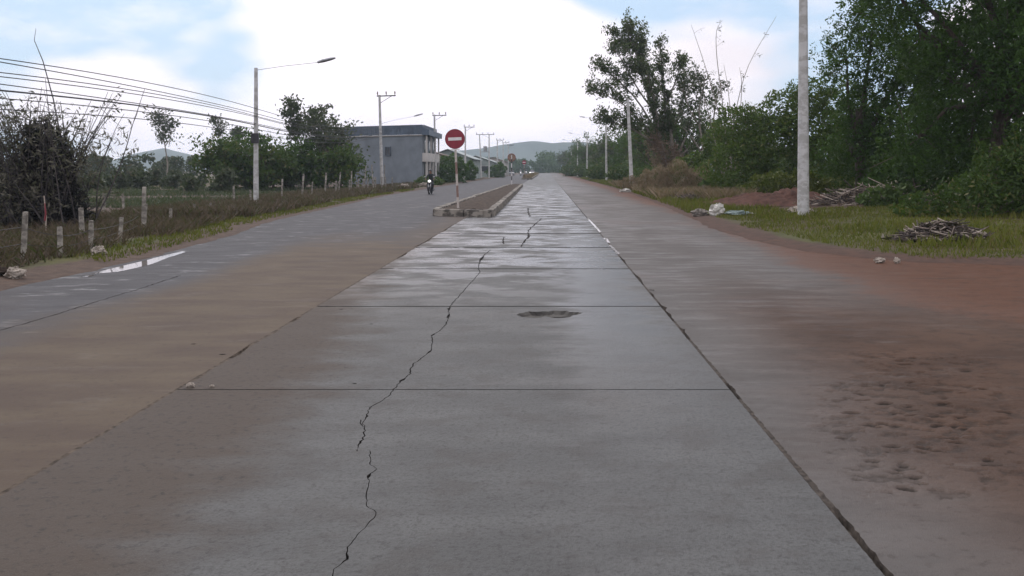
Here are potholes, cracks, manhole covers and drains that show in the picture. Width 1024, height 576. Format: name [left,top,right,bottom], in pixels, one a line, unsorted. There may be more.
crack [332,208,552,576]
